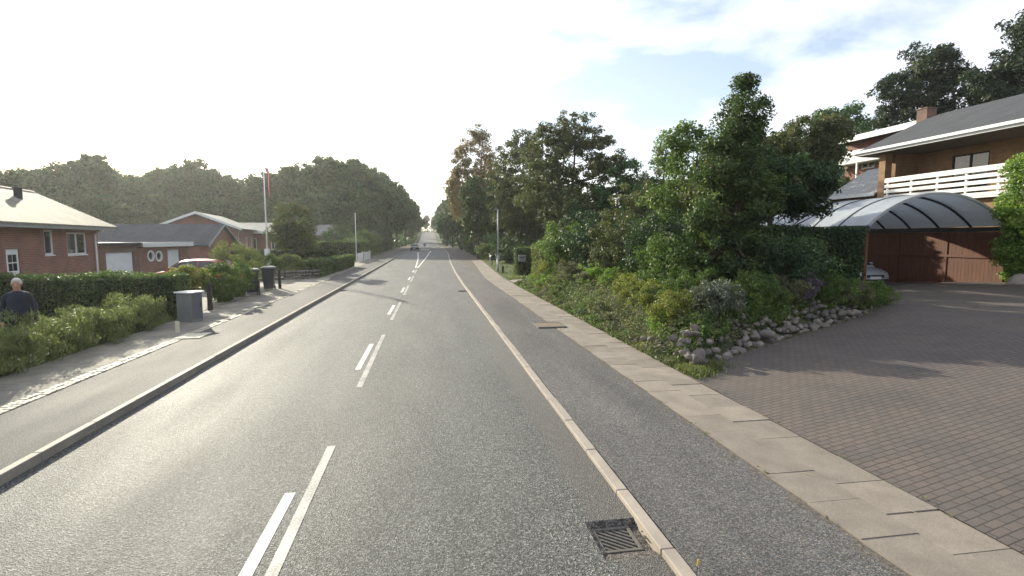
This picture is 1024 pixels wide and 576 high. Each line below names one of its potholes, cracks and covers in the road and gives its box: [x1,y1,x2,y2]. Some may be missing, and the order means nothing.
drain grate [585,518,662,562]
